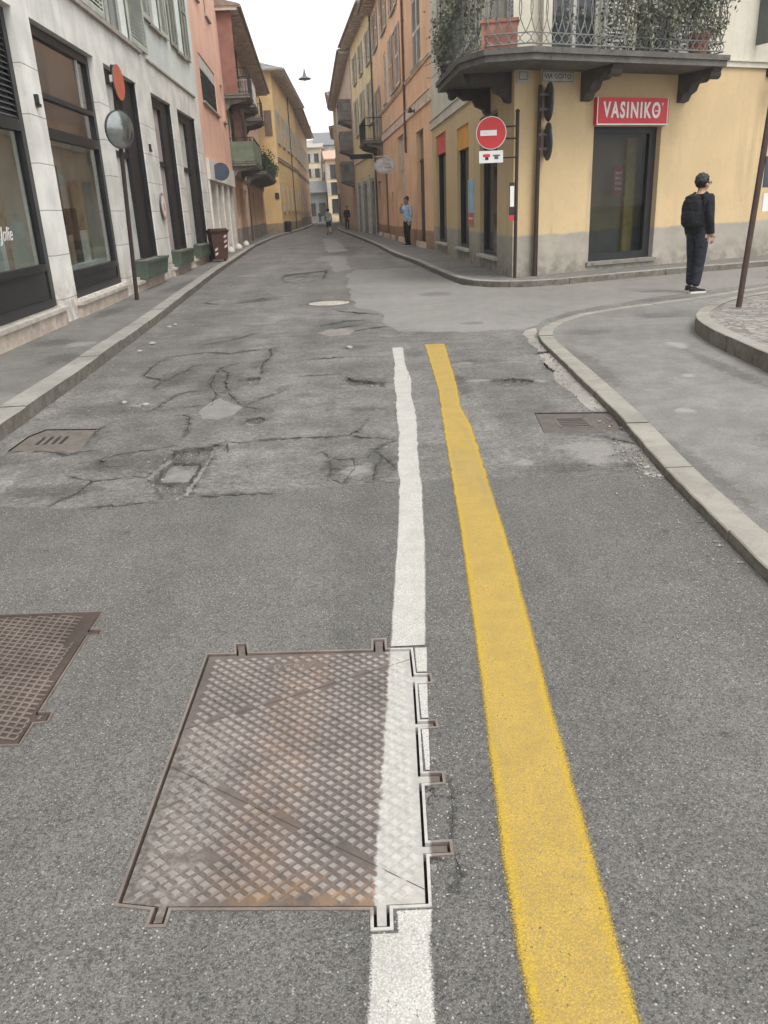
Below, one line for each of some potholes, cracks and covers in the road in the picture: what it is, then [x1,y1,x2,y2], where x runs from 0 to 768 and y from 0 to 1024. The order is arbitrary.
drain grate [11,430,96,451]
manhole cover [114,638,454,932]
crack [143,333,274,436]
pothole [243,417,265,426]
crack [13,428,167,508]
manhole cover [0,610,104,747]
pothole [347,378,383,387]
drain grate [535,413,622,433]
crack [219,430,396,484]
crack [322,311,386,332]
